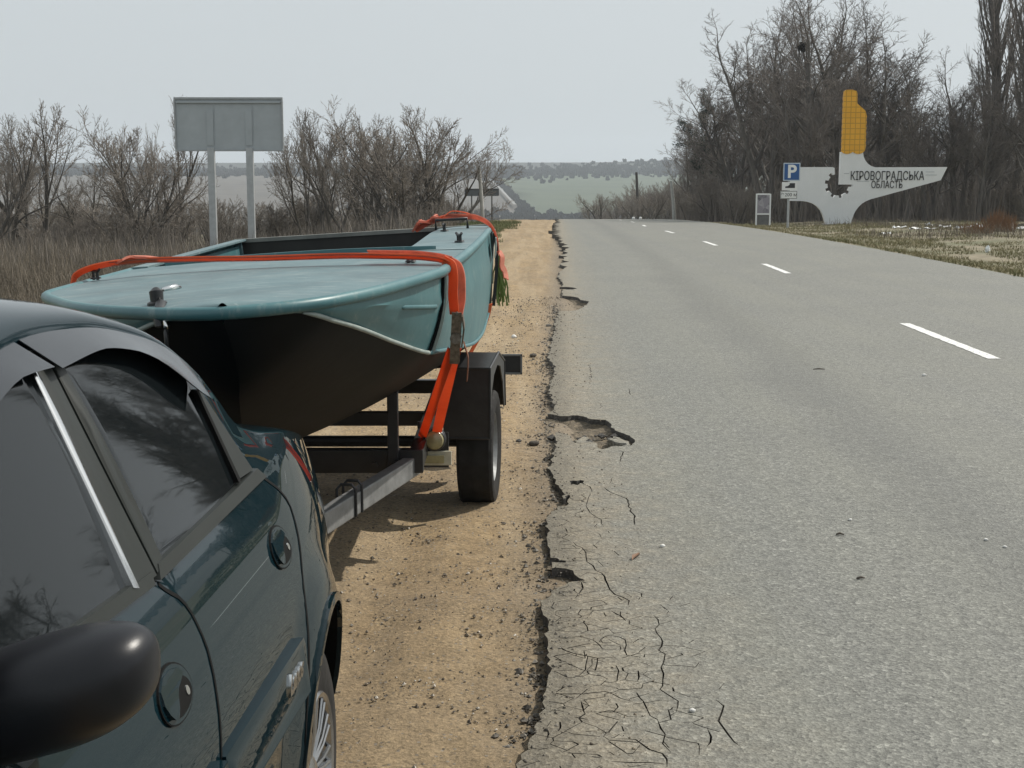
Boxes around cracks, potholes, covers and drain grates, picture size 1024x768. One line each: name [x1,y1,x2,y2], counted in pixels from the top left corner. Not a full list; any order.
pothole [556,296,589,309]
pothole [552,568,584,581]
pothole [516,414,635,449]
crack [521,478,724,768]
